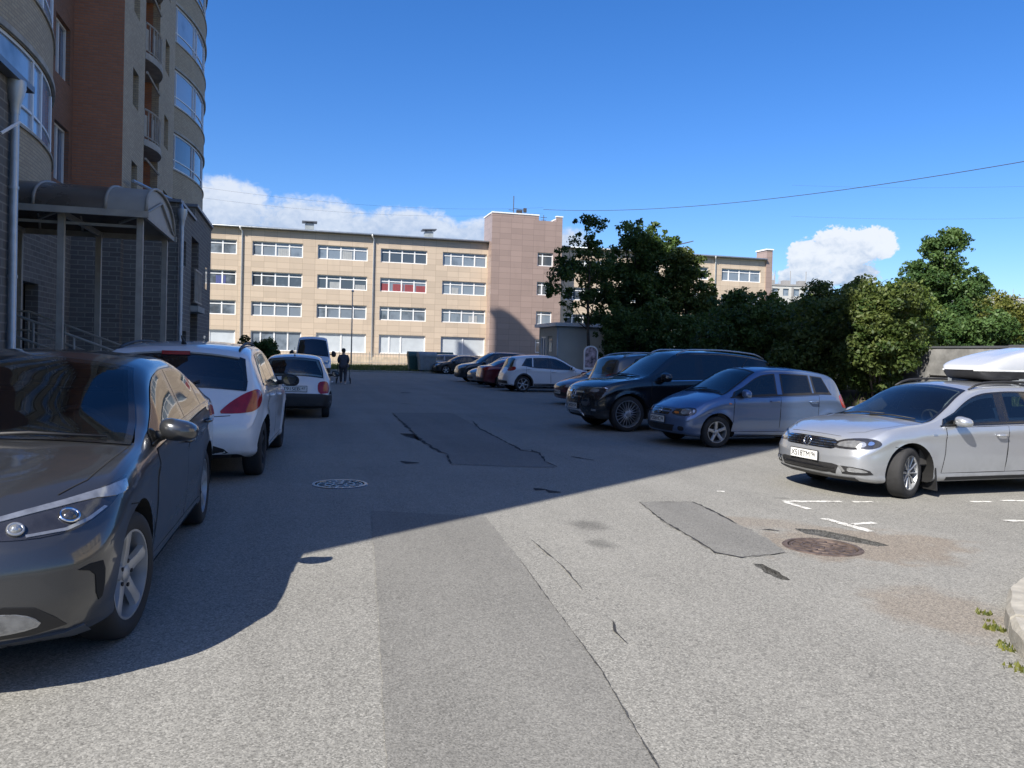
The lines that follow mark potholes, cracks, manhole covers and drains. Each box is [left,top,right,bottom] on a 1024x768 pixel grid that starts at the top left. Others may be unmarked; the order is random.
manhole cover [782,538,865,557]
manhole cover [311,479,368,489]
pothole [754,564,790,580]
crack [532,540,582,588]
